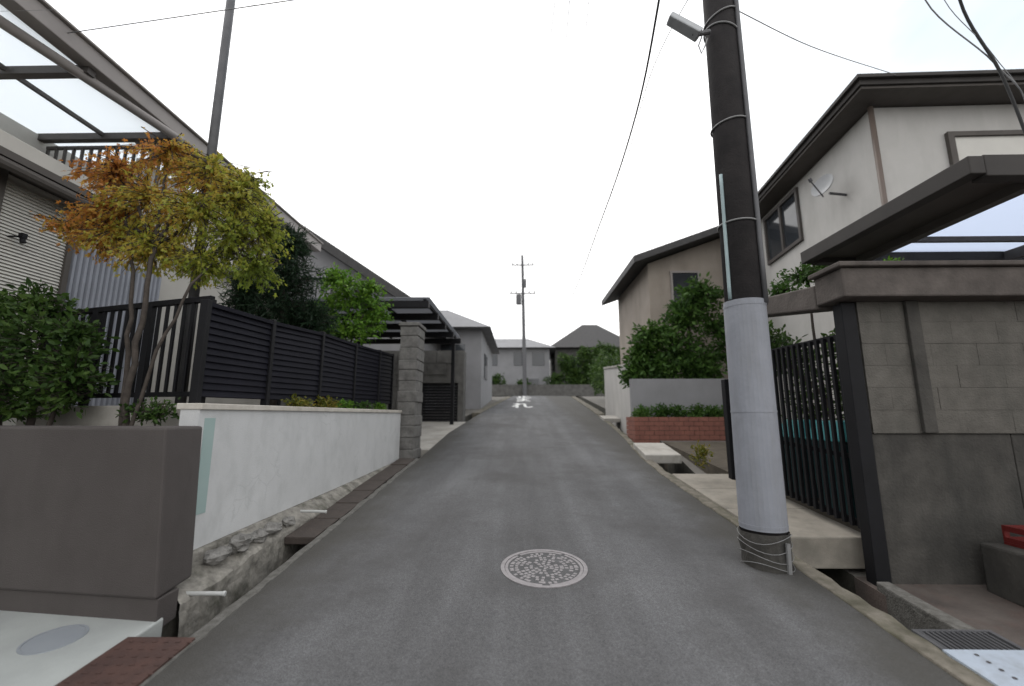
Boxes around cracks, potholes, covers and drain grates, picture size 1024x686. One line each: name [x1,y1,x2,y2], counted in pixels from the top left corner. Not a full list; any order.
manhole cover [16,624,90,655]
manhole cover [501,549,588,589]
